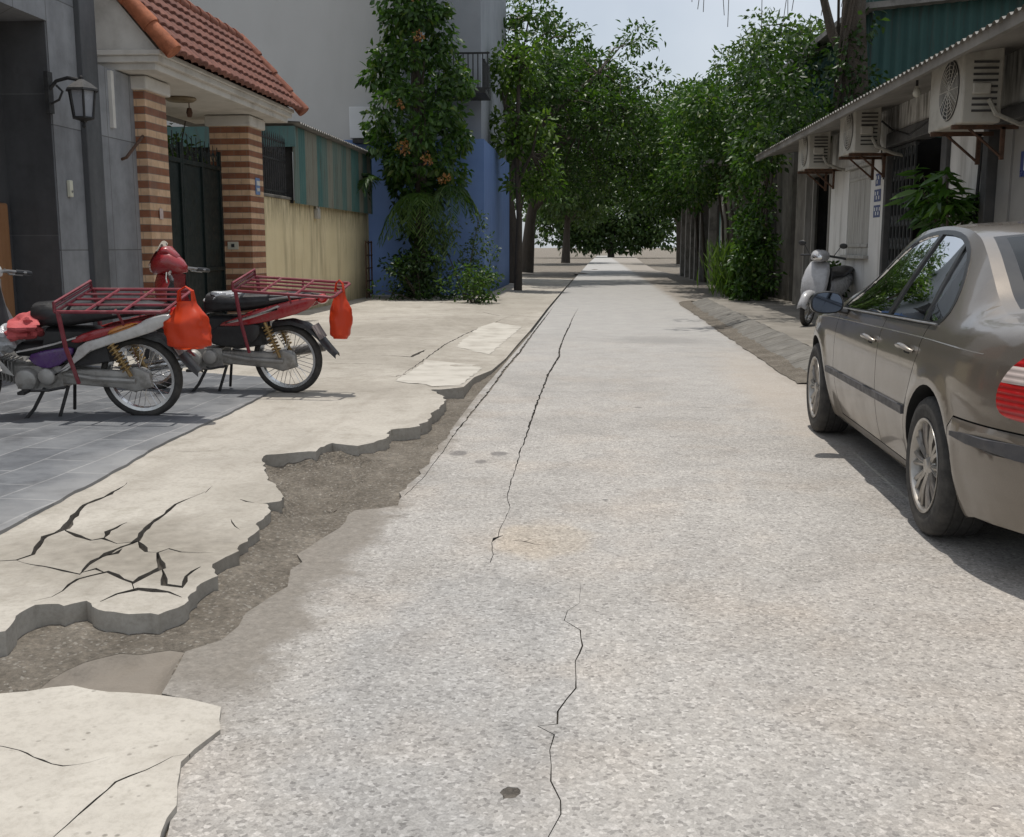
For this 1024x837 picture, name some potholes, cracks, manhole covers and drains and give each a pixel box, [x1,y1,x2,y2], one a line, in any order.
pothole [265,451,372,518]
crack [1,746,190,837]
crack [394,313,529,380]
crack [490,309,578,563]
crack [4,483,210,602]
